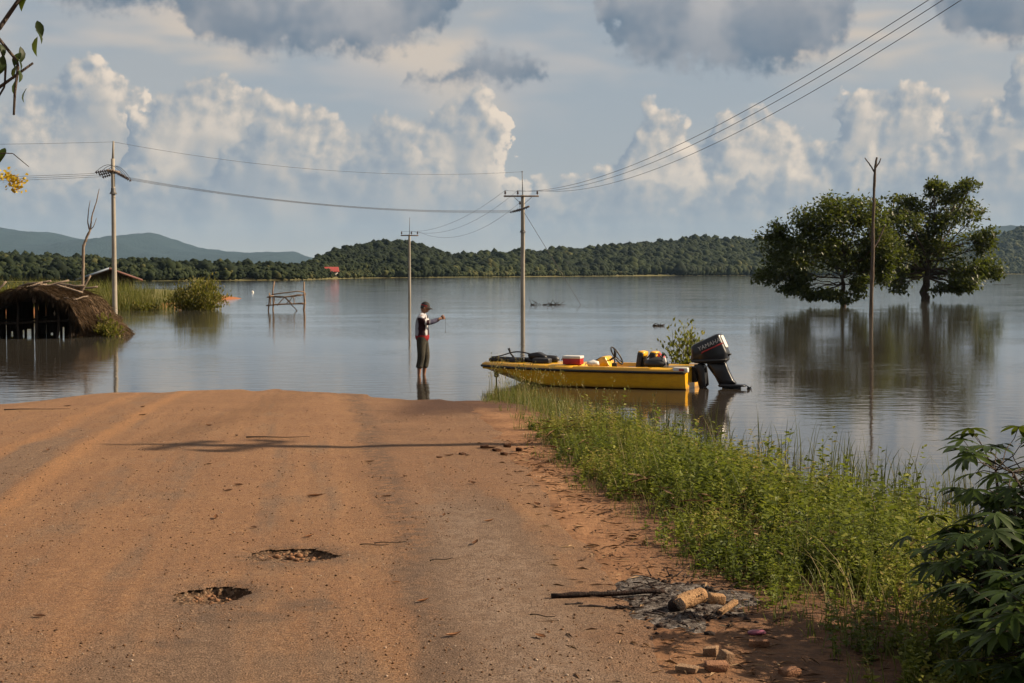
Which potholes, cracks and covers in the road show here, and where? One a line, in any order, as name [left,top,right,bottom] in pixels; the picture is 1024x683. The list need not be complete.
pothole [248,549,341,563]
pothole [173,586,252,606]
